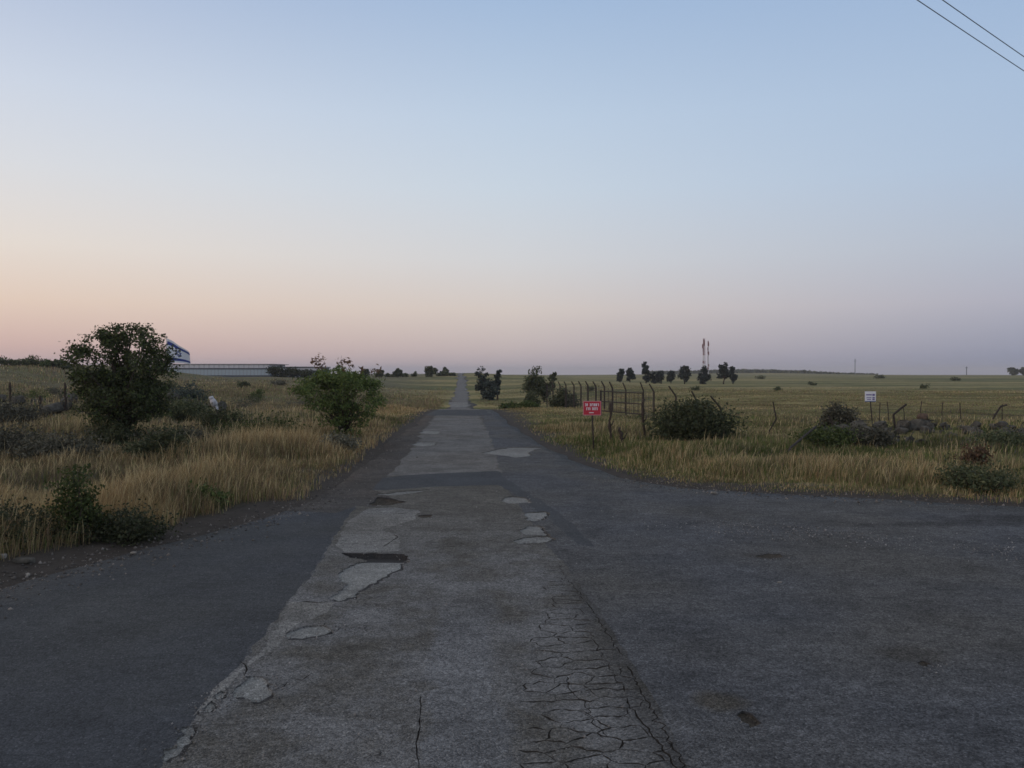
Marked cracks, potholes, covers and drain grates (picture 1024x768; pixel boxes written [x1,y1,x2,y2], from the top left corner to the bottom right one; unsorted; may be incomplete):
crack [518,564,686,768]
pothole [368,497,405,506]
pothole [737,711,761,728]
